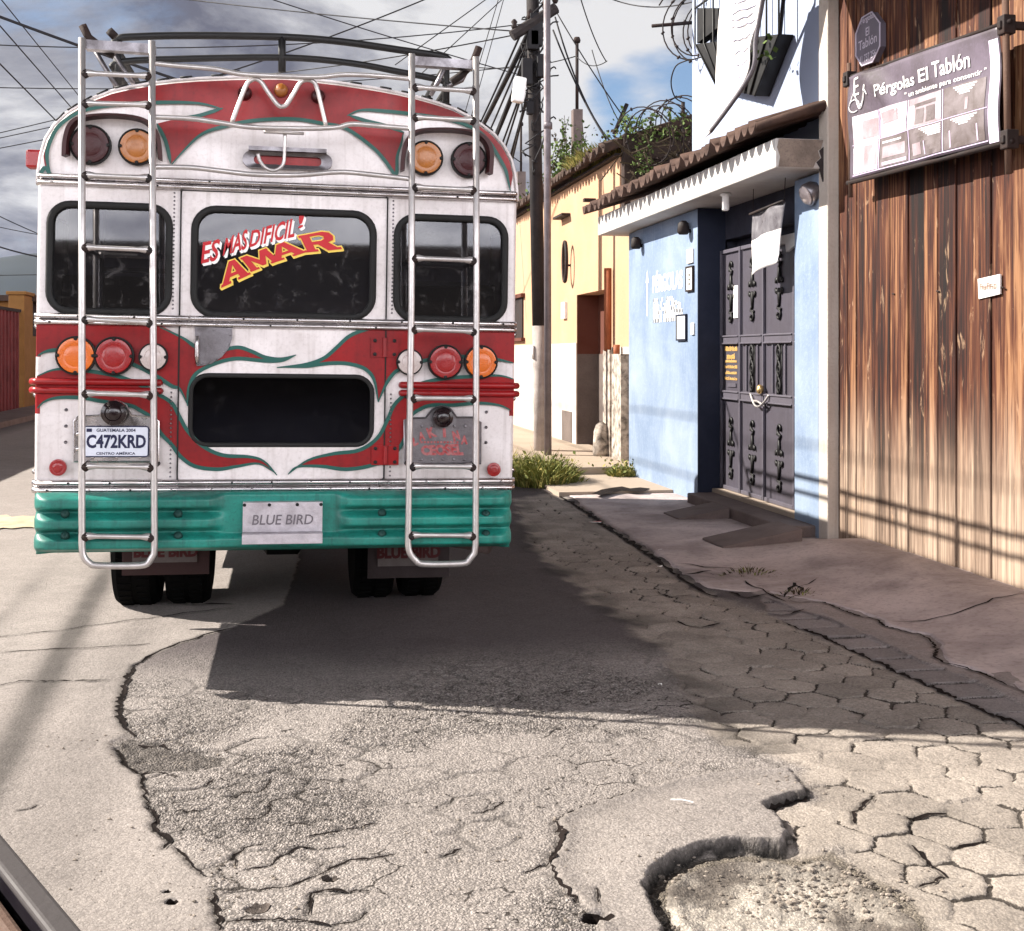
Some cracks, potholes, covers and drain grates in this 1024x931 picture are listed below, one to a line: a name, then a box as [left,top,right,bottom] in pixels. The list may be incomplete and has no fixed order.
crack [919,876,946,887]
crack [908,813,946,821]
crack [851,796,874,824]
crack [525,789,634,901]
crack [954,841,989,849]
crack [769,796,807,810]
crack [1,603,393,930]
pothole [666,861,921,931]
crack [559,496,1024,728]
